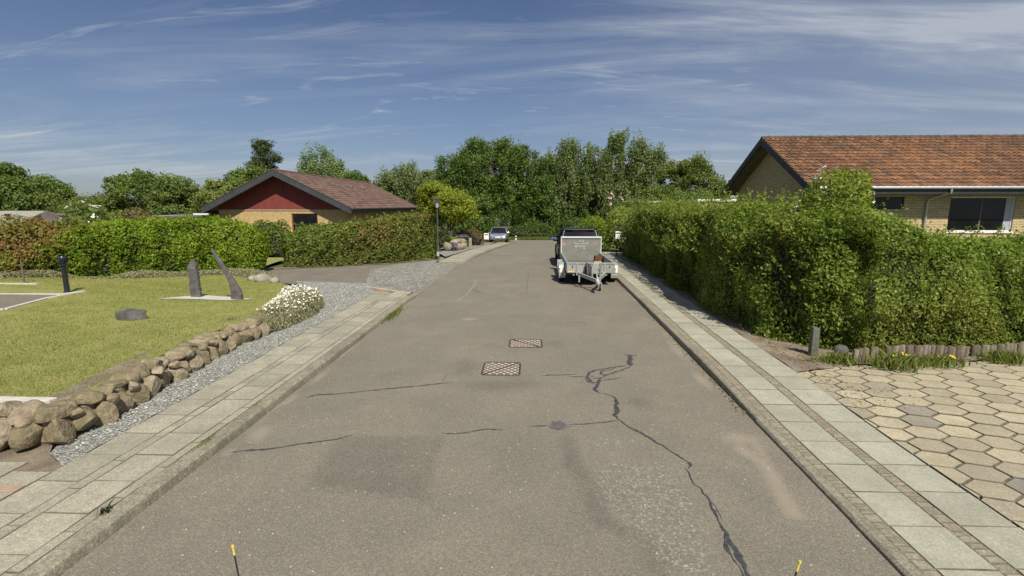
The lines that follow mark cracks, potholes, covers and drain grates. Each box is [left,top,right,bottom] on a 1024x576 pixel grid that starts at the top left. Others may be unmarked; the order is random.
crack [458,273,529,300]
manhole cover [508,339,543,348]
manhole cover [481,362,521,376]
